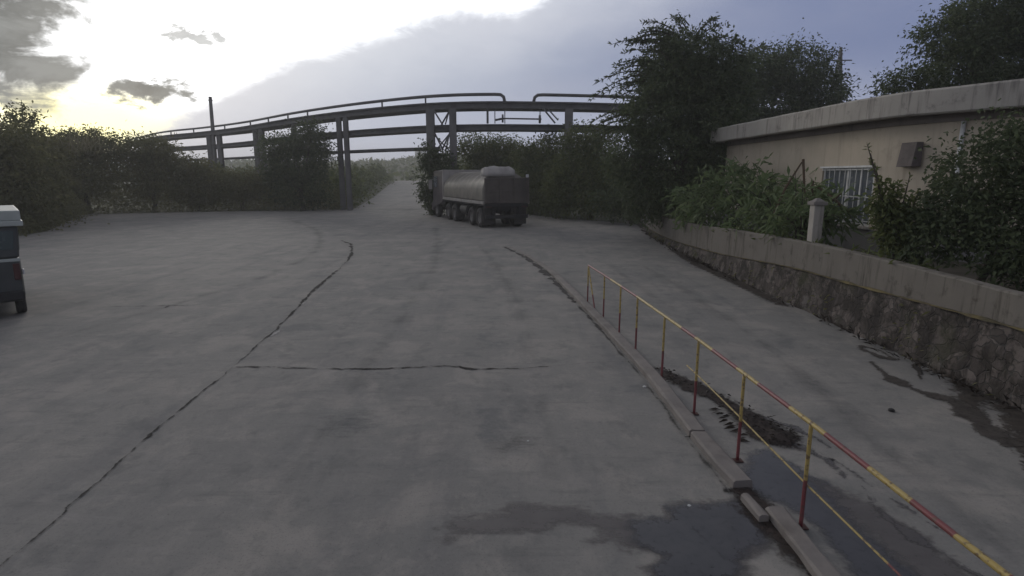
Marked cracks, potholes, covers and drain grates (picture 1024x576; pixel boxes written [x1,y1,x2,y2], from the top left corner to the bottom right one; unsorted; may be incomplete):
crack [0,240,354,566]
